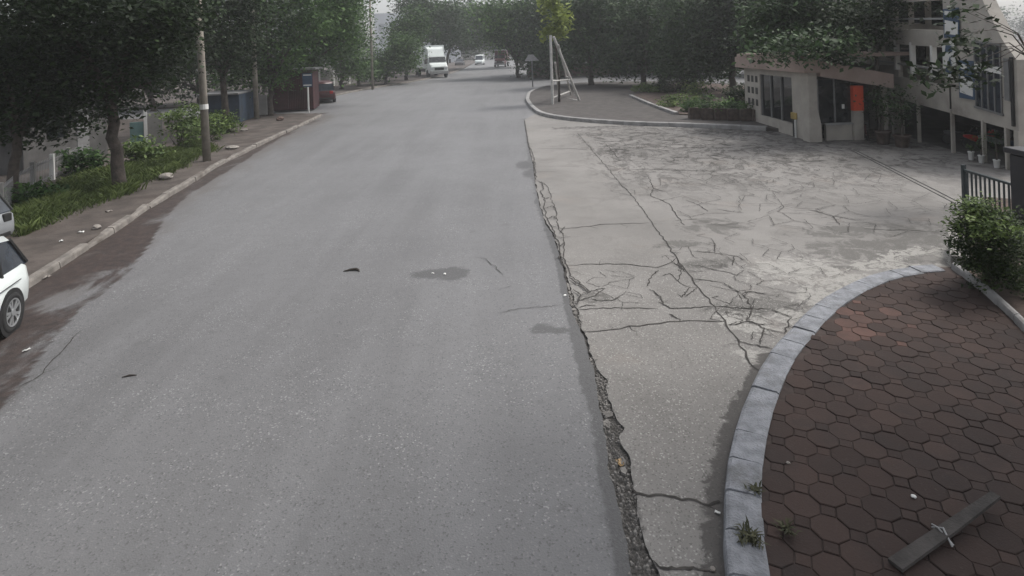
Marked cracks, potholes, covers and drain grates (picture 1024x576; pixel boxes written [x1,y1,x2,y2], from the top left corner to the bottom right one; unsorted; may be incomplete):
crack [499,127,1005,340]
crack [4,332,79,393]
